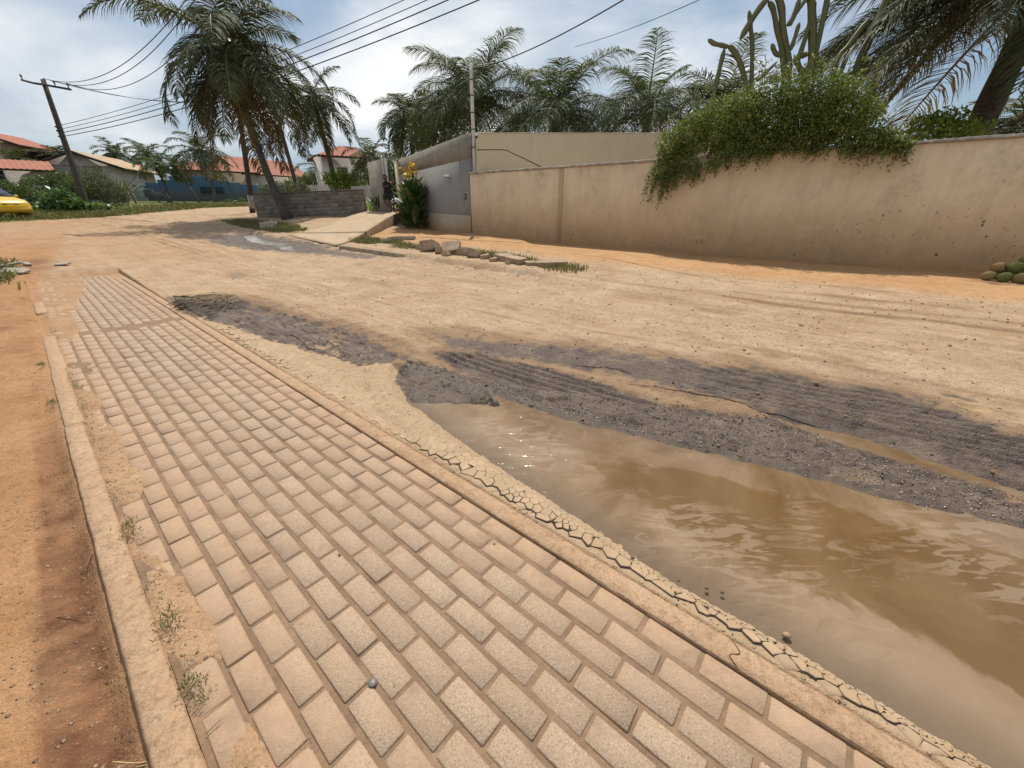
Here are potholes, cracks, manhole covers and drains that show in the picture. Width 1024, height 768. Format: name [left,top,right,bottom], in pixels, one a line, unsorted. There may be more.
pothole [398,363,1024,768]
crack [302,393,986,768]
